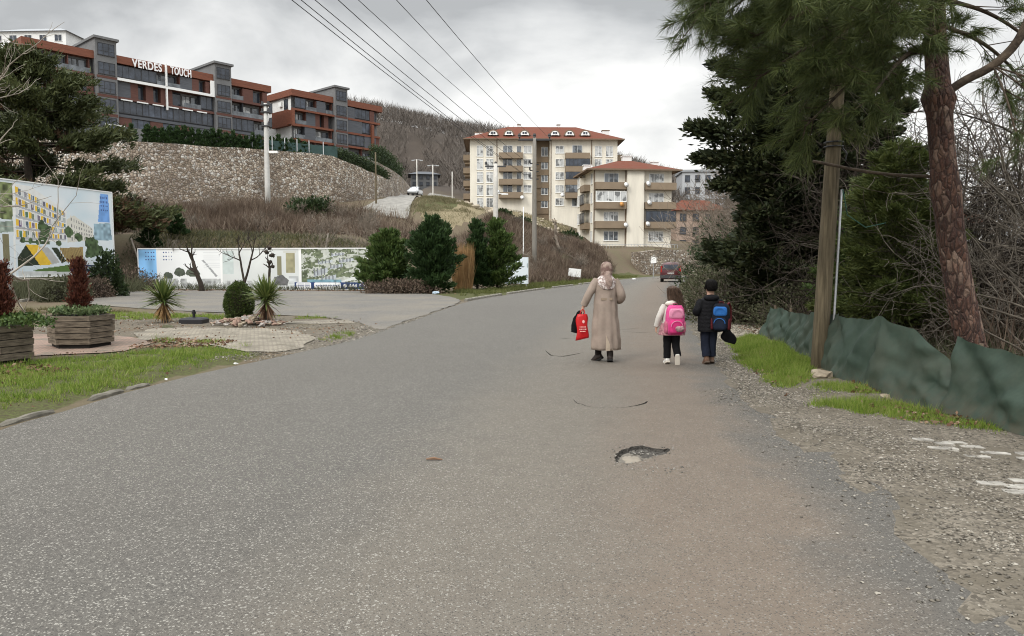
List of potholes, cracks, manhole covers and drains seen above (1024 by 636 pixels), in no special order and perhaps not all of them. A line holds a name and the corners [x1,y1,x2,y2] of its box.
pothole [607,445,690,475]
